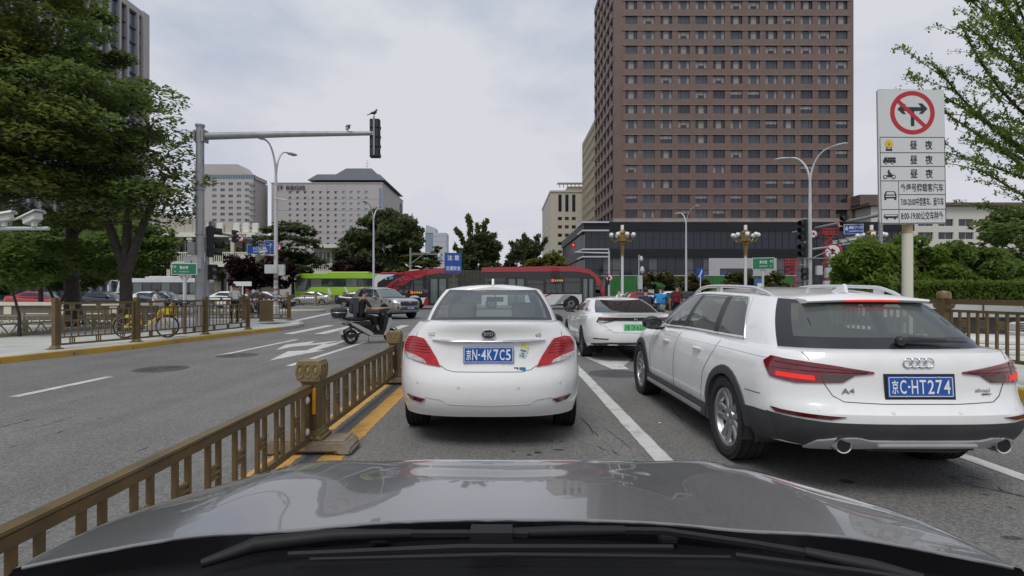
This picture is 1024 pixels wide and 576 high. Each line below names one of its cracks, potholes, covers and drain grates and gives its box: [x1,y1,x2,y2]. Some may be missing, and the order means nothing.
manhole cover [131,365,190,373]
